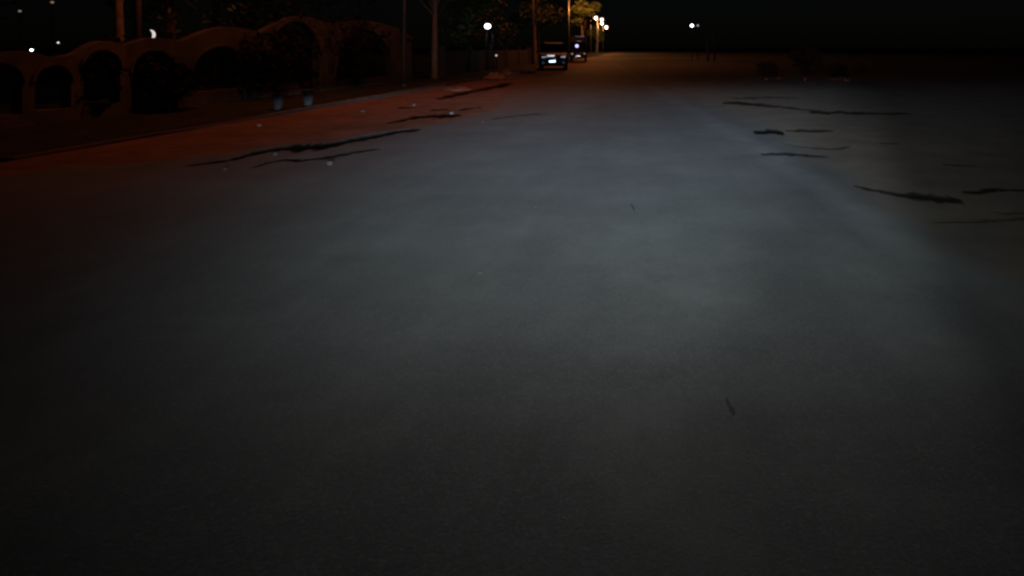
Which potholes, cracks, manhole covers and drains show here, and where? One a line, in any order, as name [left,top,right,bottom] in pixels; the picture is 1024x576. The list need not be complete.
crack [760,129,852,158]
crack [252,149,379,168]
crack [928,187,1024,223]
